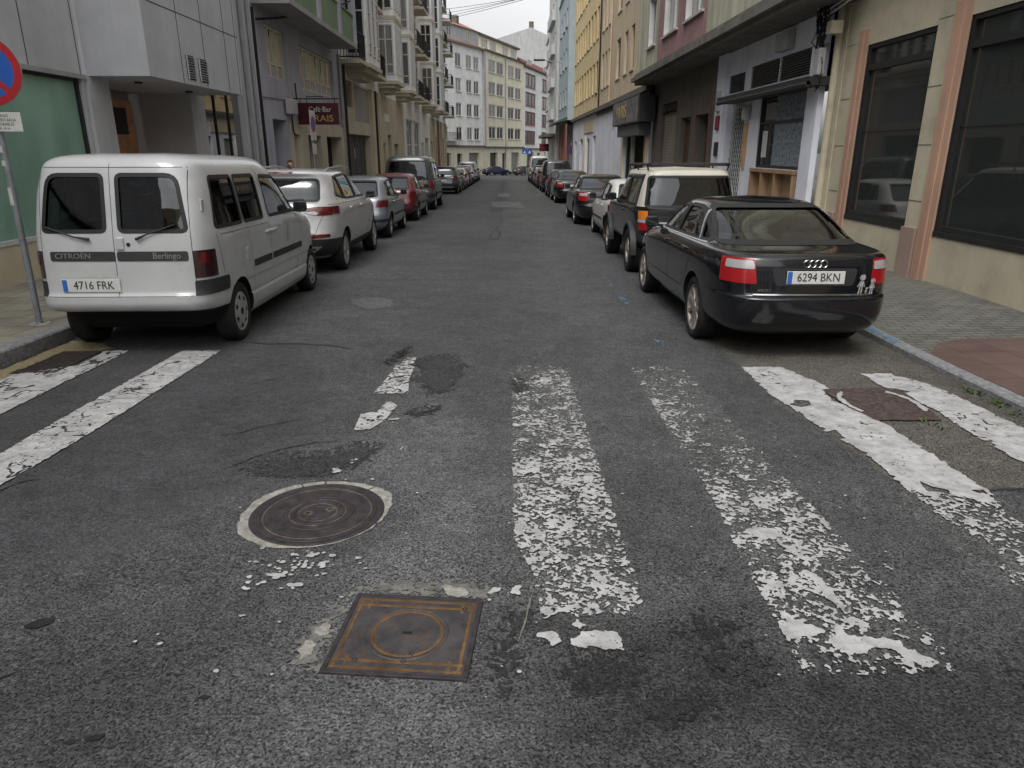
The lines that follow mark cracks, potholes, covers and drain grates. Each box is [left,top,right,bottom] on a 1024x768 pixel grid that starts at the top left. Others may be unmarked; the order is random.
manhole cover [319,593,483,682]
manhole cover [822,388,942,420]
manhole cover [237,481,392,548]
